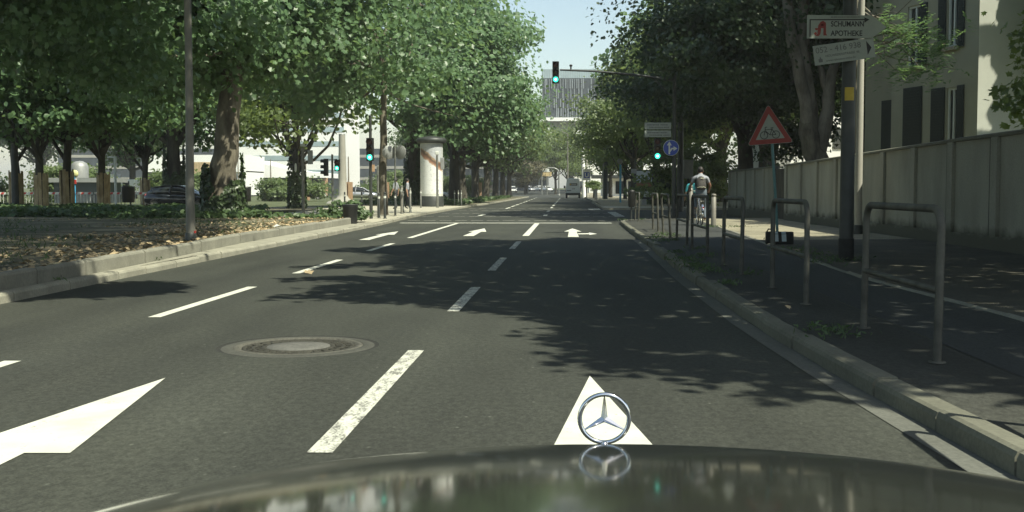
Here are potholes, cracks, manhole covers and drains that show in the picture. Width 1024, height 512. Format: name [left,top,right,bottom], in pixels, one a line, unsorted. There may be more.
manhole cover [216,336,379,358]
